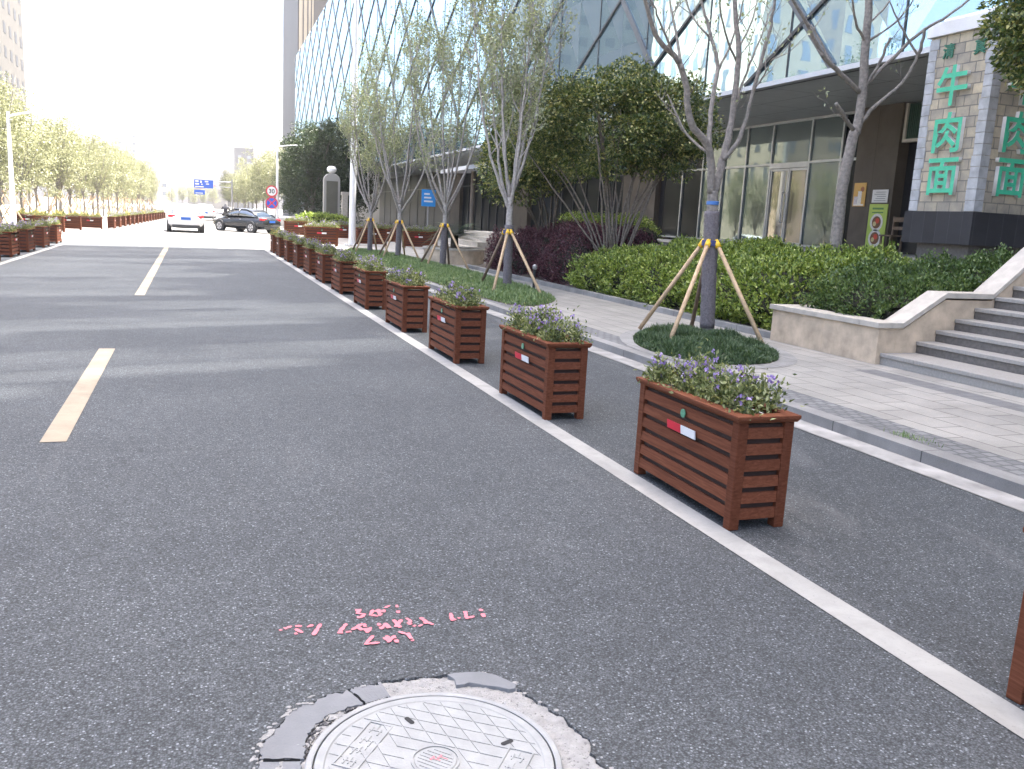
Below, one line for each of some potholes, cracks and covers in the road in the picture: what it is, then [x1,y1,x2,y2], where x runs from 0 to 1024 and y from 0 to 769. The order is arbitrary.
crack [263,693,365,762]
manhole cover [305,692,563,769]
